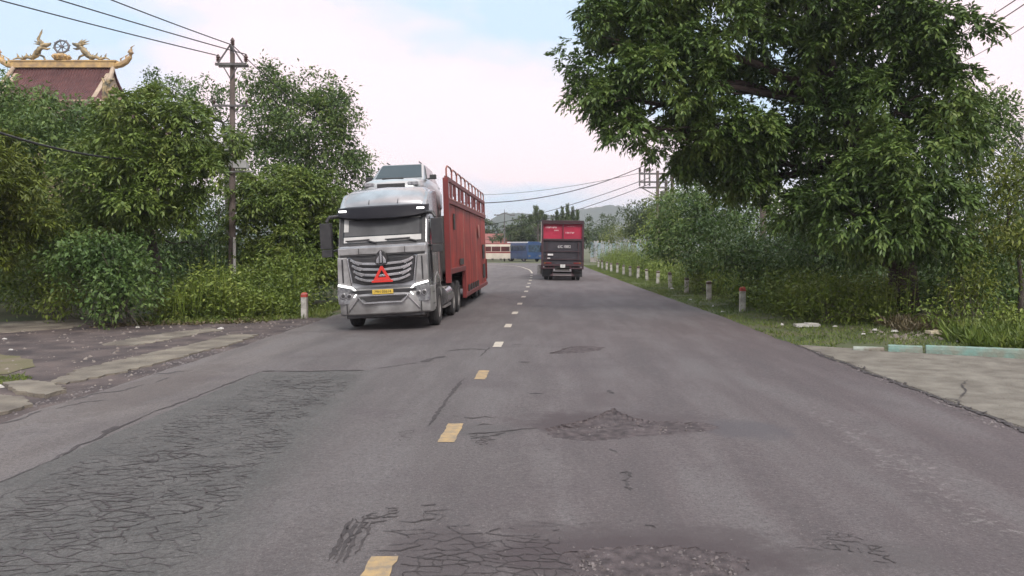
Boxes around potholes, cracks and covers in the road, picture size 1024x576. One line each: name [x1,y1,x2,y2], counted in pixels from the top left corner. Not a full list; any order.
crack [0,374,359,576]
pothole [549,346,604,354]
pothole [545,408,719,441]
pothole [560,545,750,576]
crack [328,504,656,576]
crack [549,390,633,491]
crack [381,344,533,446]
crack [797,530,896,563]
